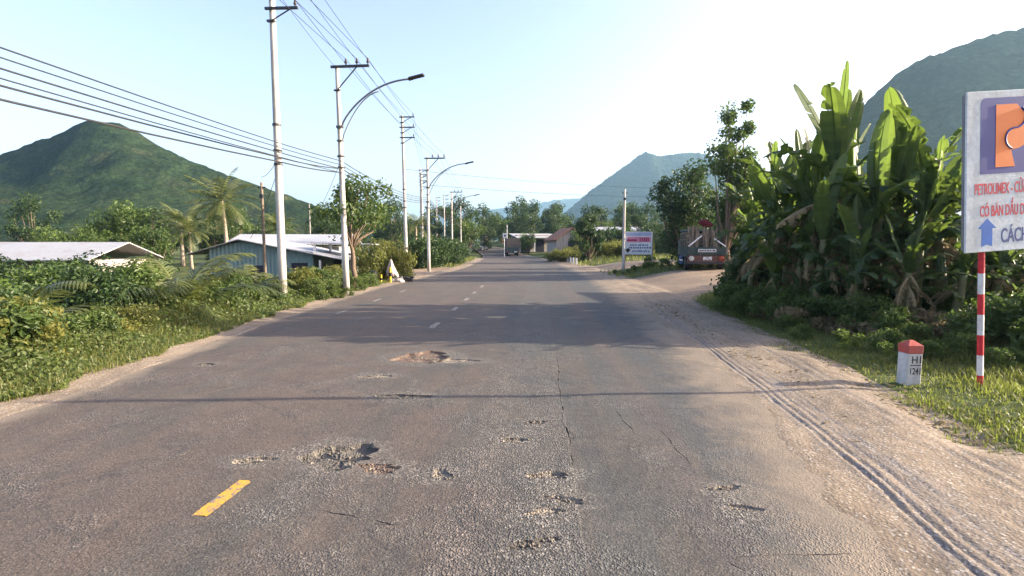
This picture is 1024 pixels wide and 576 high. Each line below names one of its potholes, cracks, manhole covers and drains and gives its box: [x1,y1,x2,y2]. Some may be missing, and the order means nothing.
pothole [525,471,569,479]
pothole [432,468,454,480]
pothole [507,536,564,550]
pothole [297,442,379,474]
pothole [357,463,401,474]
crack [326,511,405,525]
pothole [524,507,566,516]
pothole [542,495,584,505]
pothole [389,350,451,364]
